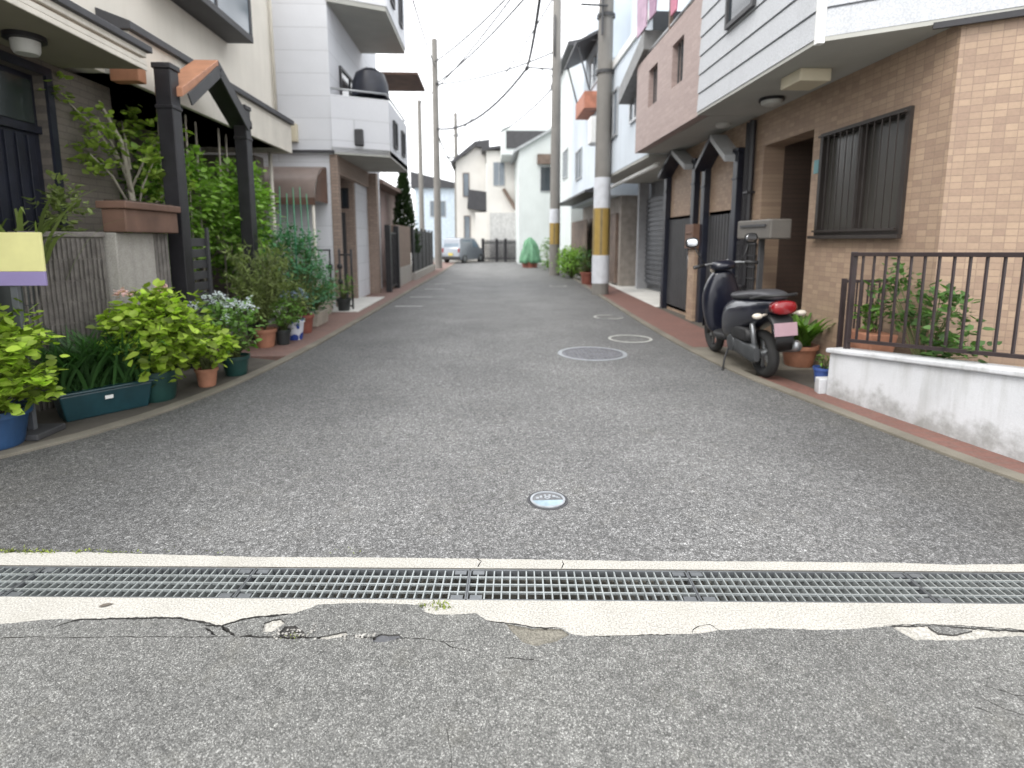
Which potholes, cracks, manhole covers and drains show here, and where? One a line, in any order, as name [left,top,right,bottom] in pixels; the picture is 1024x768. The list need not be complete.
drain grate [233,568,470,600]
drain grate [686,571,938,603]
crack [486,620,558,630]
crack [3,614,321,639]
manhole cover [558,347,627,361]
manhole cover [527,491,568,510]
drain grate [904,572,1024,604]
crack [398,638,470,651]
drain grate [466,569,701,602]
manhole cover [608,335,653,343]
crack [973,685,1024,715]
drain grate [0,566,44,597]
